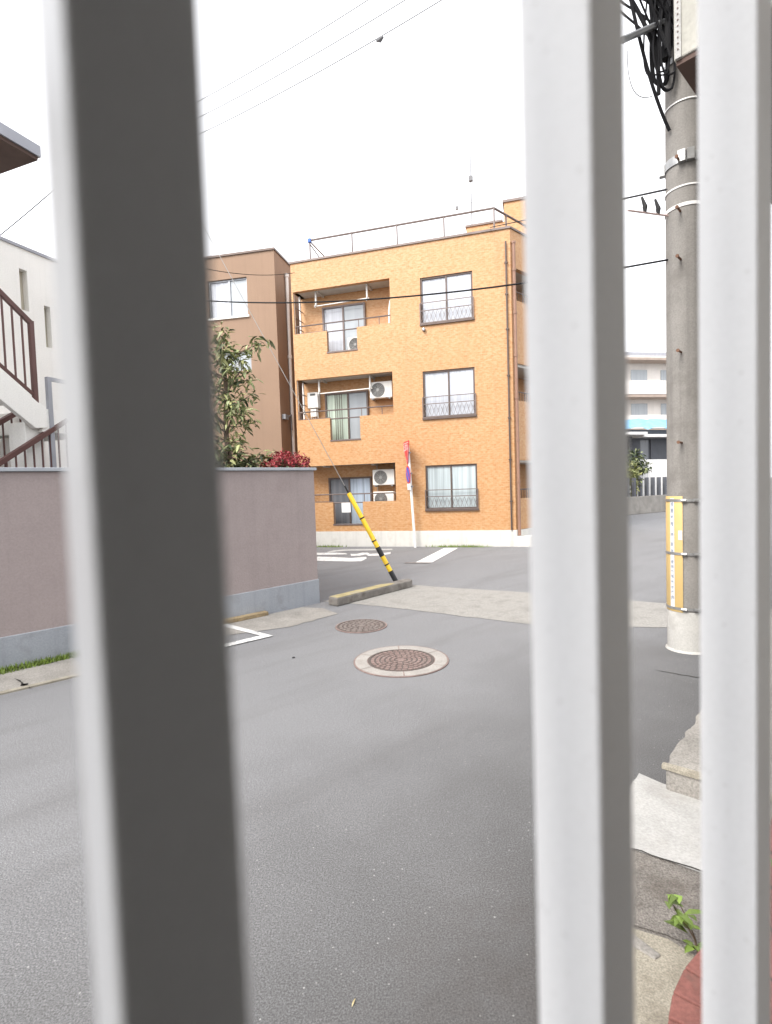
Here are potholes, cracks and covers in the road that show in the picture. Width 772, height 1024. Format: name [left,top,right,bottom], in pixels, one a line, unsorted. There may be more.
manhole cover [353,646,449,678]
manhole cover [335,619,387,633]
